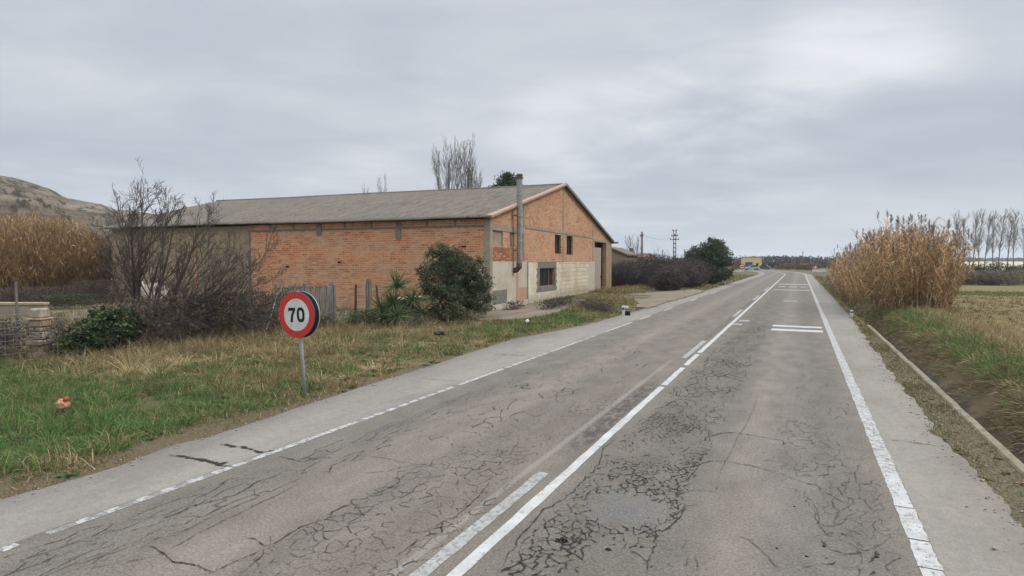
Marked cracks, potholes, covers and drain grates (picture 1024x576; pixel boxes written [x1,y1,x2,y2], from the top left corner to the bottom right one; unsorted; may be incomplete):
crack [3,304,730,576]
crack [500,326,903,576]
